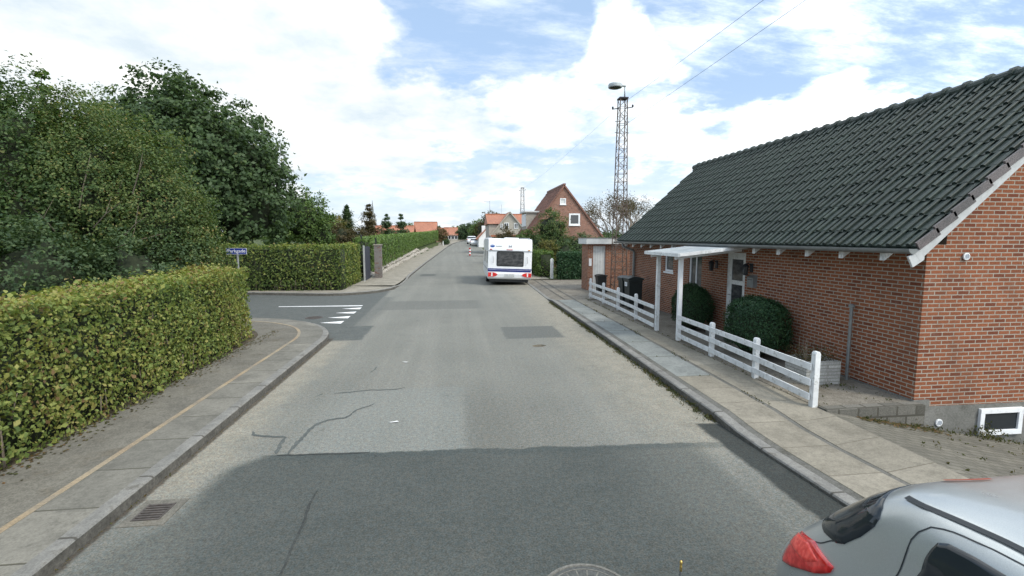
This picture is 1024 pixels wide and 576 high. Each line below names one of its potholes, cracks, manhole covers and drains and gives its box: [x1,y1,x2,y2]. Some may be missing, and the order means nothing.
crack [279,491,317,576]
drain grate [115,498,190,528]
crack [251,387,405,454]
manhole cover [548,563,620,576]
